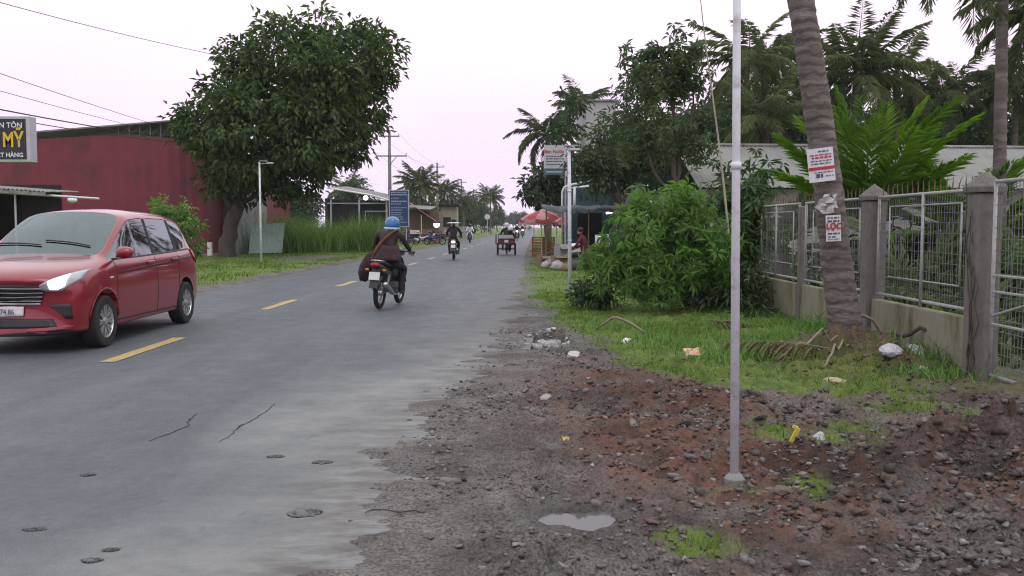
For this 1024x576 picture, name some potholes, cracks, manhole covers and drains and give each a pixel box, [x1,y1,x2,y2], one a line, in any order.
pothole [287,508,322,518]
